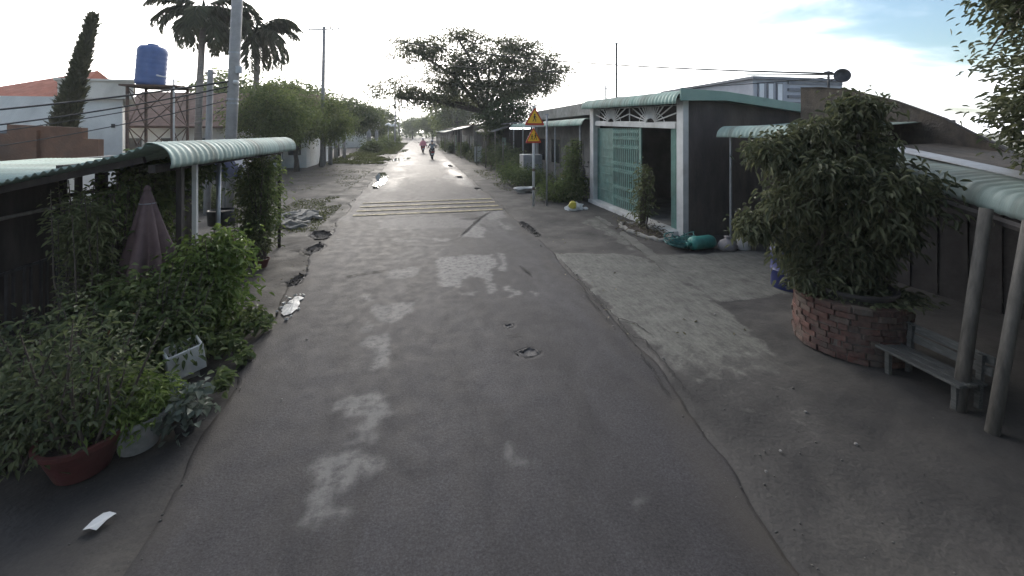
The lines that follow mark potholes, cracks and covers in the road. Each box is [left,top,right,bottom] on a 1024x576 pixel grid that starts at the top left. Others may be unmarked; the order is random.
pothole [303,242,326,255]
pothole [520,221,542,237]
pothole [516,348,540,358]
crack [460,211,490,236]
pothole [287,273,305,287]
pothole [308,230,333,240]
